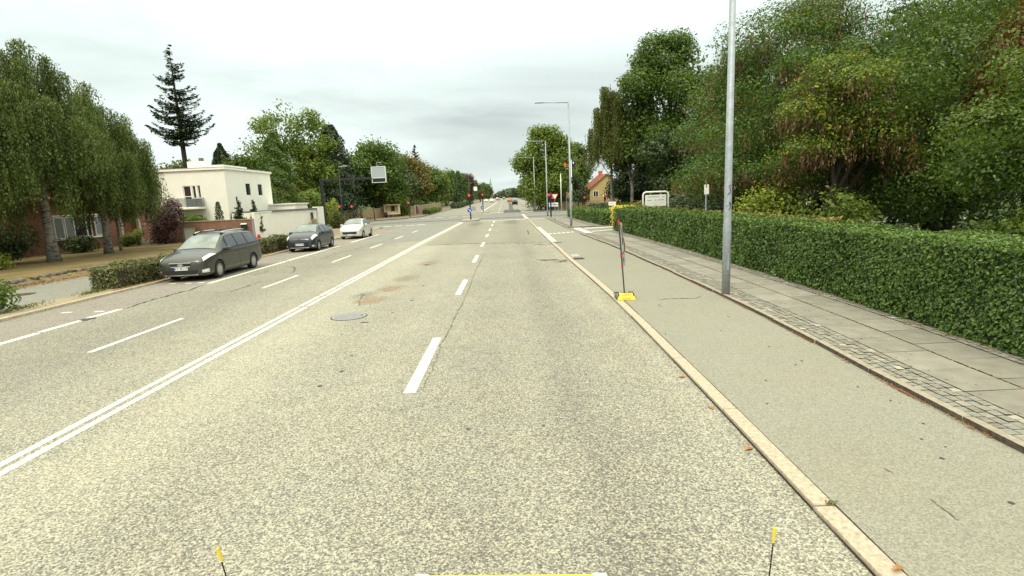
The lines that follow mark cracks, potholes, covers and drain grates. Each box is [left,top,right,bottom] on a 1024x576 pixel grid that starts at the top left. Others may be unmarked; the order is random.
manhole cover [330,313,367,321]
